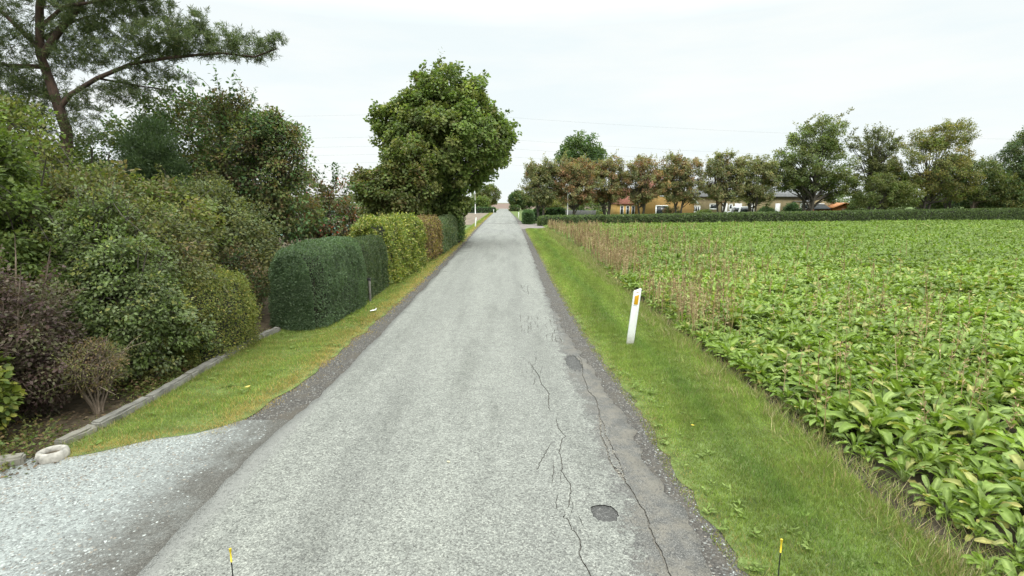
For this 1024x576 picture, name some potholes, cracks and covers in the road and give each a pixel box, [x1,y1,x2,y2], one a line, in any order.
crack [528,362,591,576]
crack [578,356,672,576]
pothole [565,355,583,372]
pothole [591,505,619,522]
crack [520,316,562,343]
